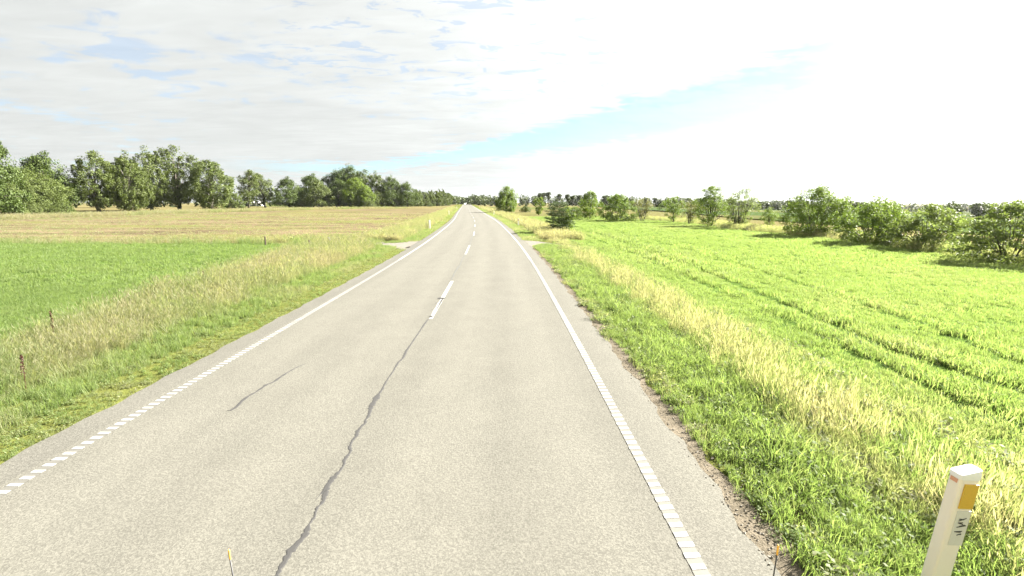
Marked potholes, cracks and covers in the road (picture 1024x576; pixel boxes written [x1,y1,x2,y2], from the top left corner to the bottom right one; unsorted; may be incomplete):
crack [227,236,473,576]
